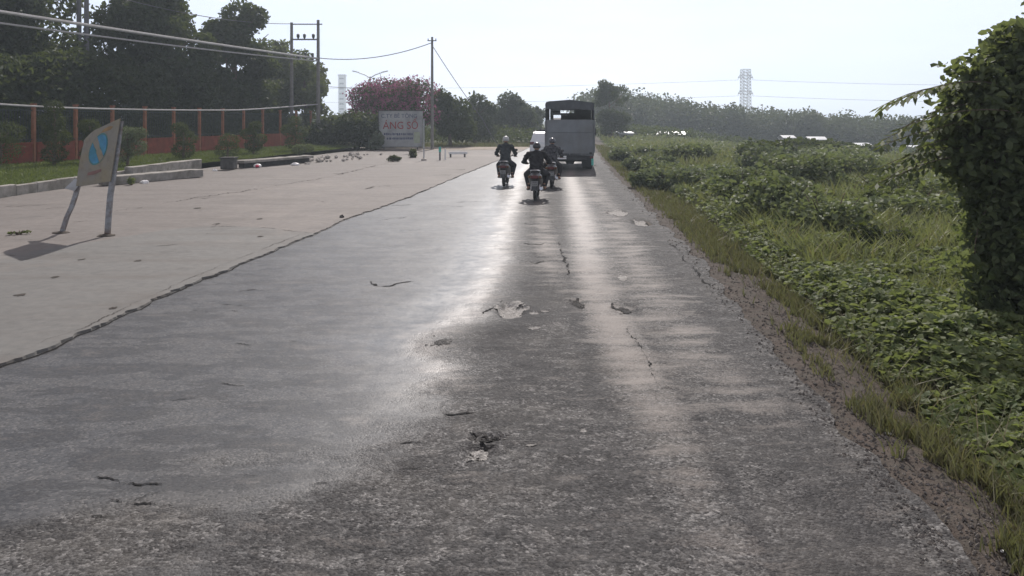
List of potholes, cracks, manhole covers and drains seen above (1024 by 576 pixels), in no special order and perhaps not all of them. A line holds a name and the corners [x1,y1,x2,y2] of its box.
pothole [494,301,527,319]
pothole [467,449,488,462]
crack [525,242,571,280]
crack [89,476,171,517]
crack [667,240,722,302]
